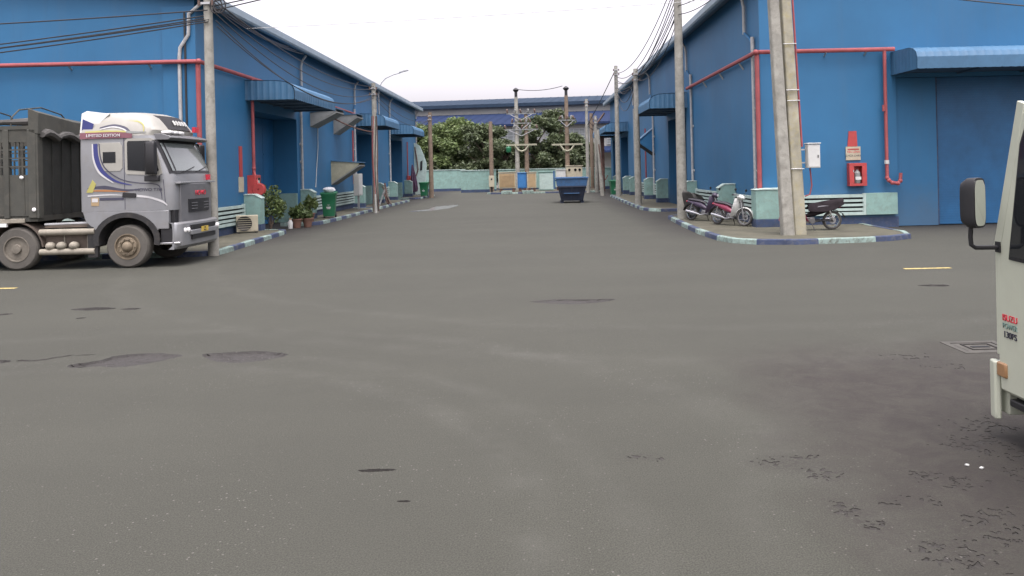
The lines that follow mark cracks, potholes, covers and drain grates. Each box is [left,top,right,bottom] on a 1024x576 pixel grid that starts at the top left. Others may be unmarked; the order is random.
crack [18,354,95,362]
